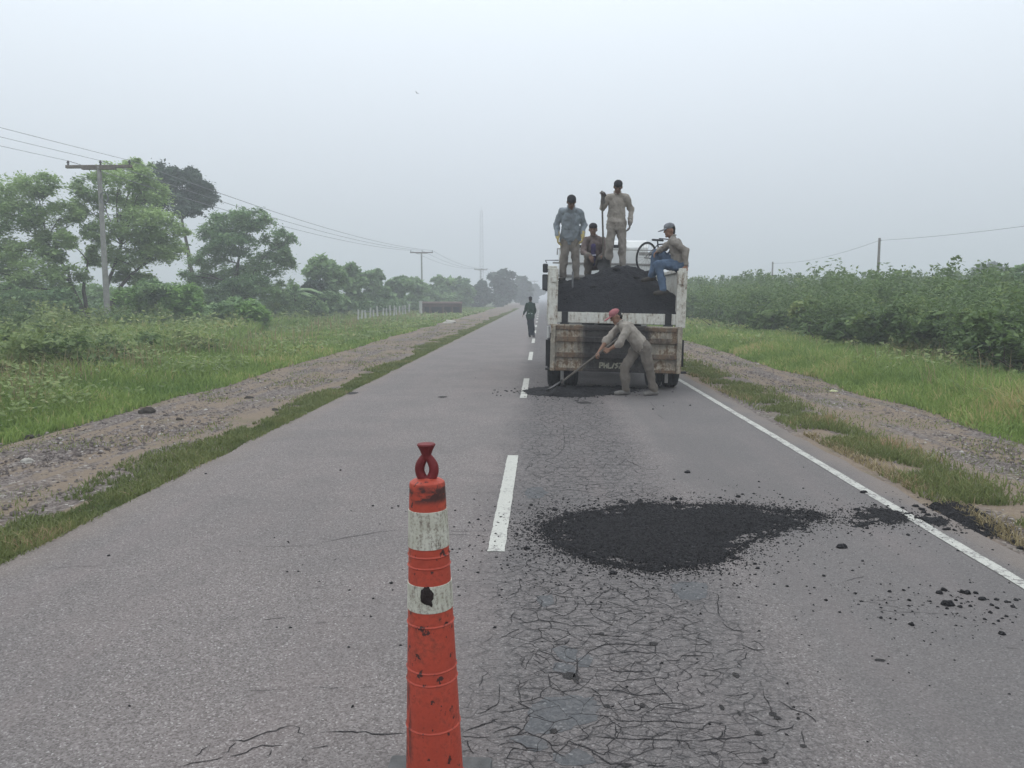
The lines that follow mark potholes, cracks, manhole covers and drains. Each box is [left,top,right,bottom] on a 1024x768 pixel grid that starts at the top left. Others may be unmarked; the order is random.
crack [183,725,405,766]
crack [523,395,672,516]
crack [461,553,816,768]
